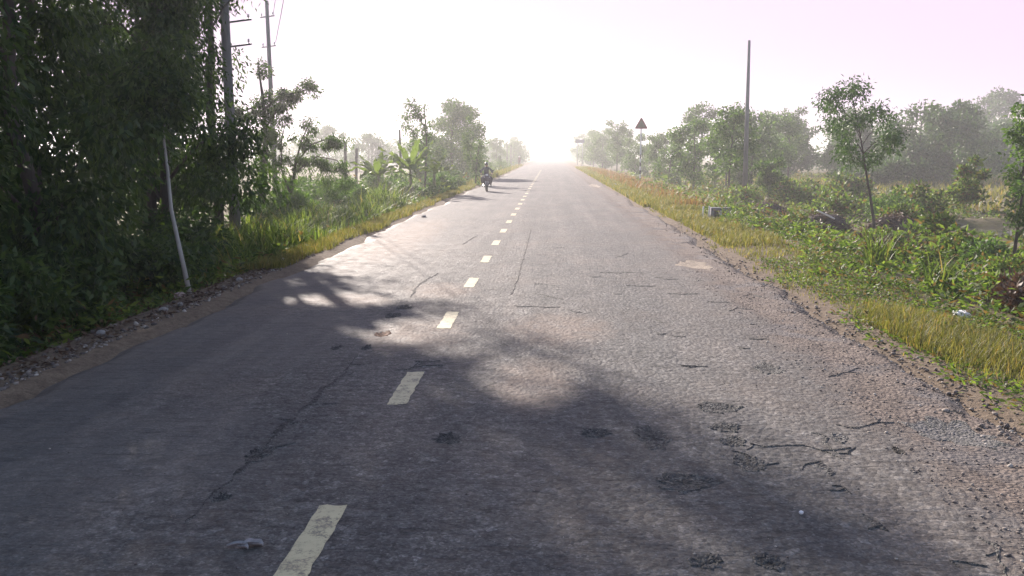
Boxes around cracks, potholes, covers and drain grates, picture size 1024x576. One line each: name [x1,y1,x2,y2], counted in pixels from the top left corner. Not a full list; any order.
pothole [631,425,674,451]
pothole [581,428,613,438]
pothole [687,553,724,570]
crack [732,418,894,494]
pothole [752,552,786,572]
pothole [697,401,744,414]
crack [410,273,438,298]
crack [185,355,372,522]
pothole [656,472,724,494]
crack [520,283,582,313]
pothole [432,431,462,444]
